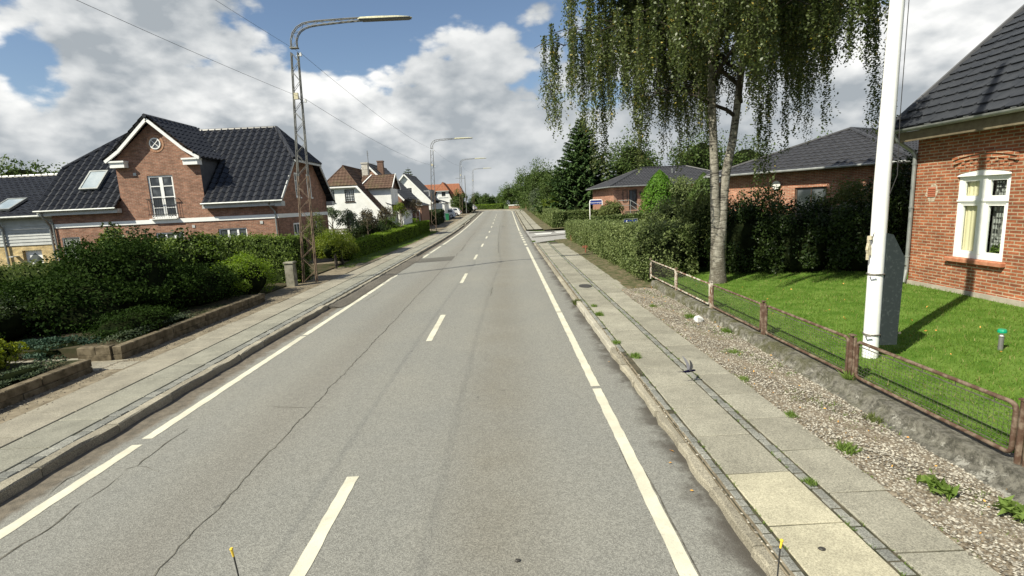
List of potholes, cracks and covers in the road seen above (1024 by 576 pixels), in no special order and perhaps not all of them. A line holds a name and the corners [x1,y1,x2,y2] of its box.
crack [0,429,187,559]
crack [154,262,449,576]
